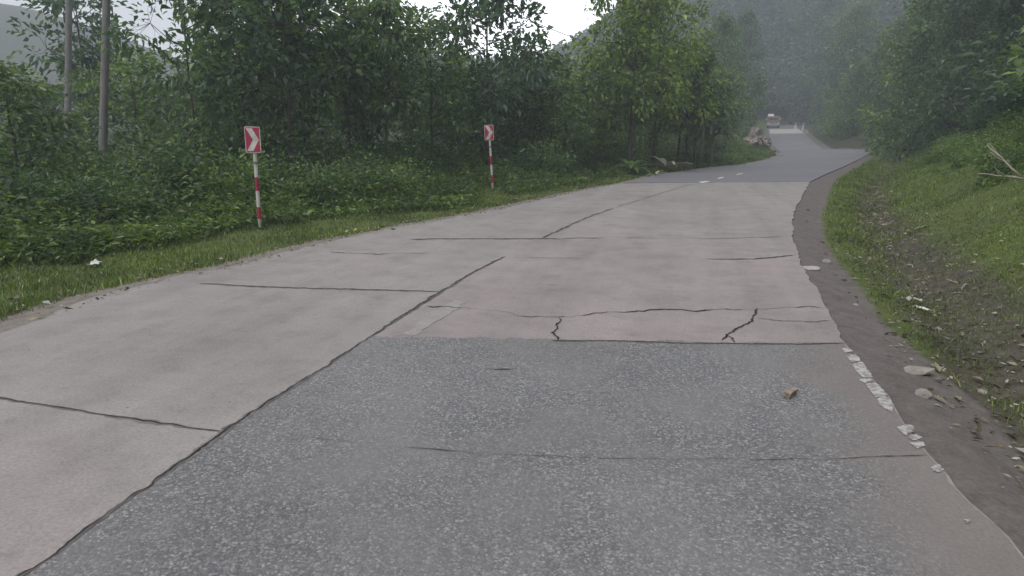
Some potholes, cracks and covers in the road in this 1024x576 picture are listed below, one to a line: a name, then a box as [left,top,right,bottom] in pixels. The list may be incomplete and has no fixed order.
crack [430,306,824,343]
crack [412,447,929,460]
